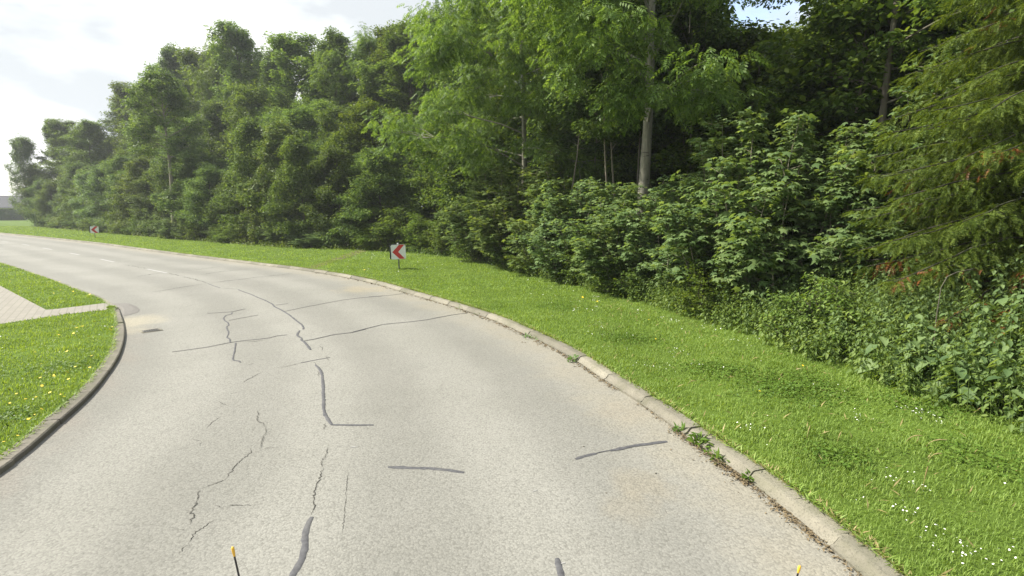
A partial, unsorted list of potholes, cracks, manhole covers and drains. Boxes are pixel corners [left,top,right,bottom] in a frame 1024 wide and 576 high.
crack [289,448,328,576]
crack [179,411,269,550]
